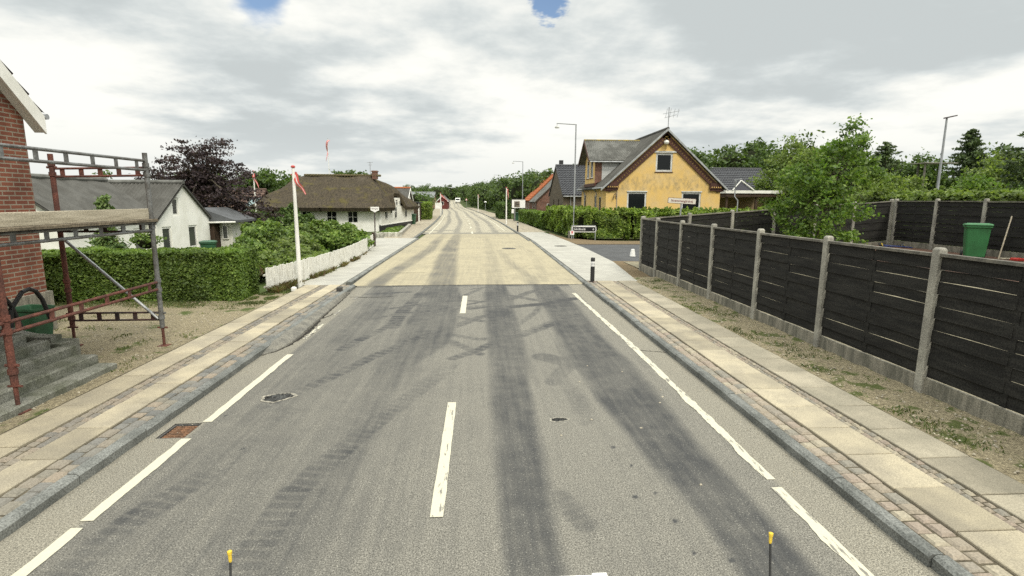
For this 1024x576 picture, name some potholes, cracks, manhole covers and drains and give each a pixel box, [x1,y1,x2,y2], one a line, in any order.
pothole [260,393,298,403]
